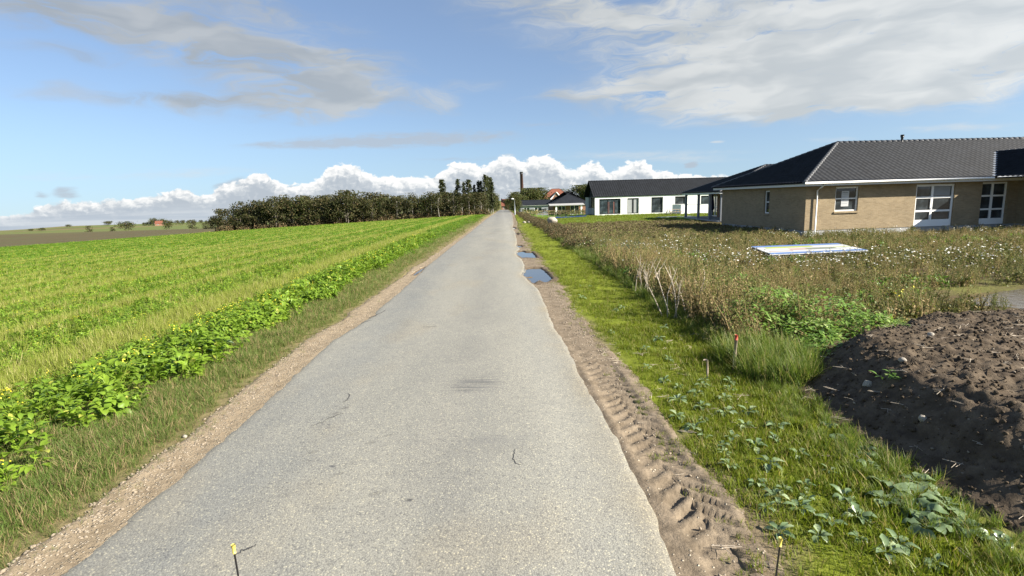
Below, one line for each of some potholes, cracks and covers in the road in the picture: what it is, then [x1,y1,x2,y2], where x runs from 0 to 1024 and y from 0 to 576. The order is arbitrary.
pothole [516,250,543,259]
pothole [522,267,559,285]
